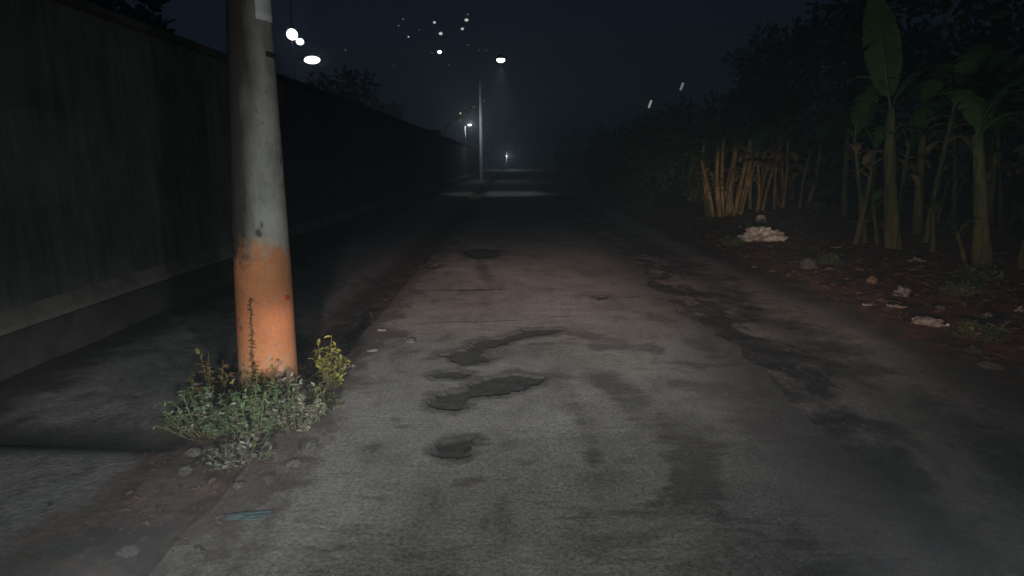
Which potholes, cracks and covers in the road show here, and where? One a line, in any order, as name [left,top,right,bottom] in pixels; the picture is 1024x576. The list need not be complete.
pothole [425,373,549,411]
pothole [428,369,474,380]
pothole [430,436,477,460]
pothole [437,328,564,366]
